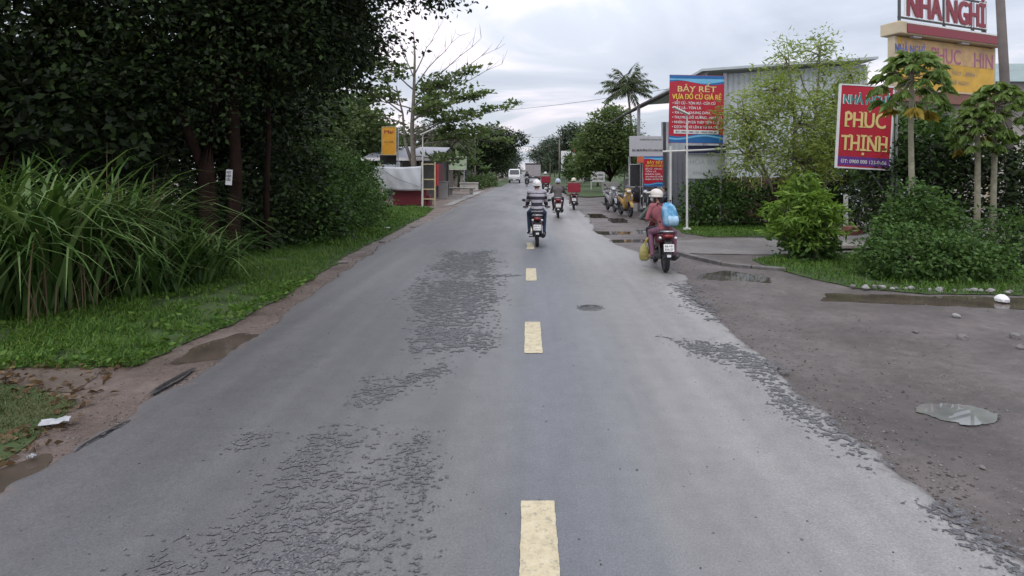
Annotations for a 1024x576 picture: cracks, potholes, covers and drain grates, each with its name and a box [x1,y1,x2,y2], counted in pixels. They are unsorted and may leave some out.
pothole [914,403,1010,427]
crack [344,249,520,416]
crack [100,416,452,576]
